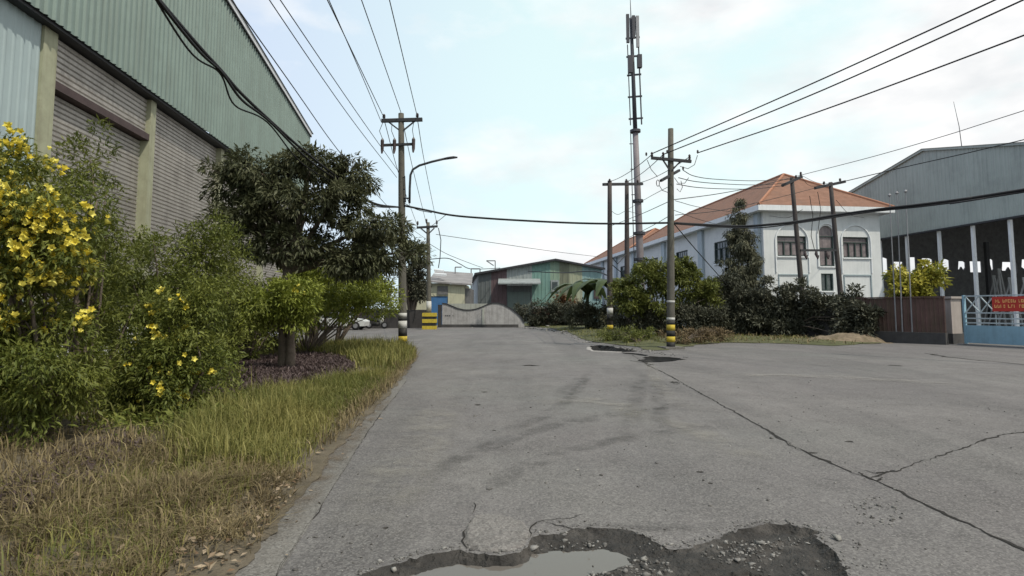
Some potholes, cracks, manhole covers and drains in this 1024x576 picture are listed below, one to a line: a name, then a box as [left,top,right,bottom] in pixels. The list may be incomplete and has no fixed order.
pothole [360,527,675,576]
crack [529,514,581,534]
crack [771,431,1024,550]
pothole [671,523,849,576]
